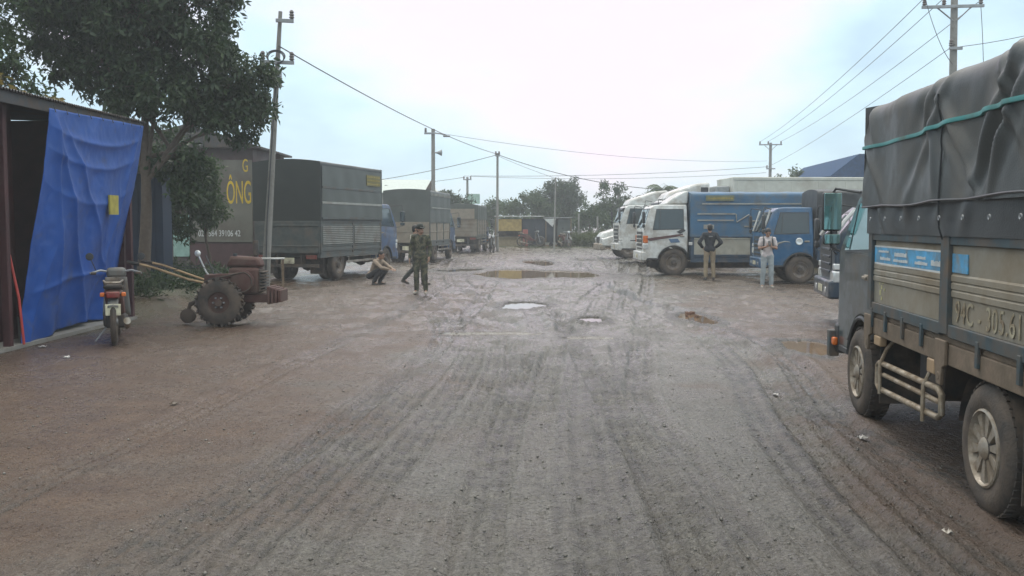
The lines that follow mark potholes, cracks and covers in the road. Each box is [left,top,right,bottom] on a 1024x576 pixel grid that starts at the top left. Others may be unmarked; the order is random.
pothole [561,315,617,327]
pothole [763,338,843,359]
pothole [463,268,608,280]
pothole [665,311,730,327]
pothole [491,300,557,311]
